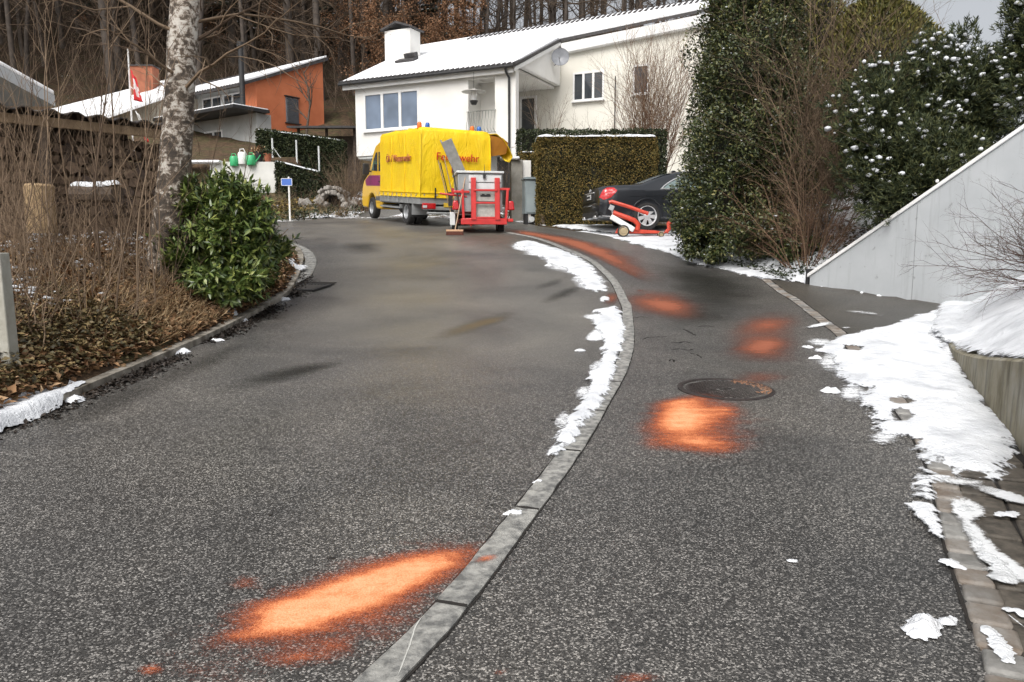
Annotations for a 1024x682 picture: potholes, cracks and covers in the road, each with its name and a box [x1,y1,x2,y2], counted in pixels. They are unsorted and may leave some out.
crack [644,326,713,362]
drain grate [292,282,337,291]
manhole cover [677,378,776,401]
